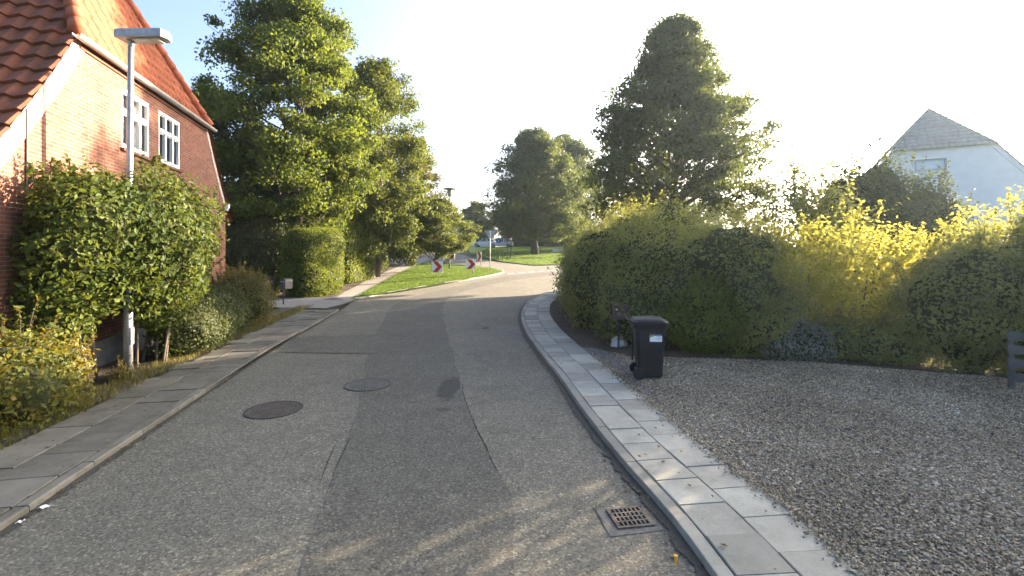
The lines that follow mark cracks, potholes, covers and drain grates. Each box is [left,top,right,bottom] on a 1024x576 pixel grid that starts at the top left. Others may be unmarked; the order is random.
manhole cover [243,401,303,419]
manhole cover [344,378,391,392]
drain grate [594,505,663,537]
